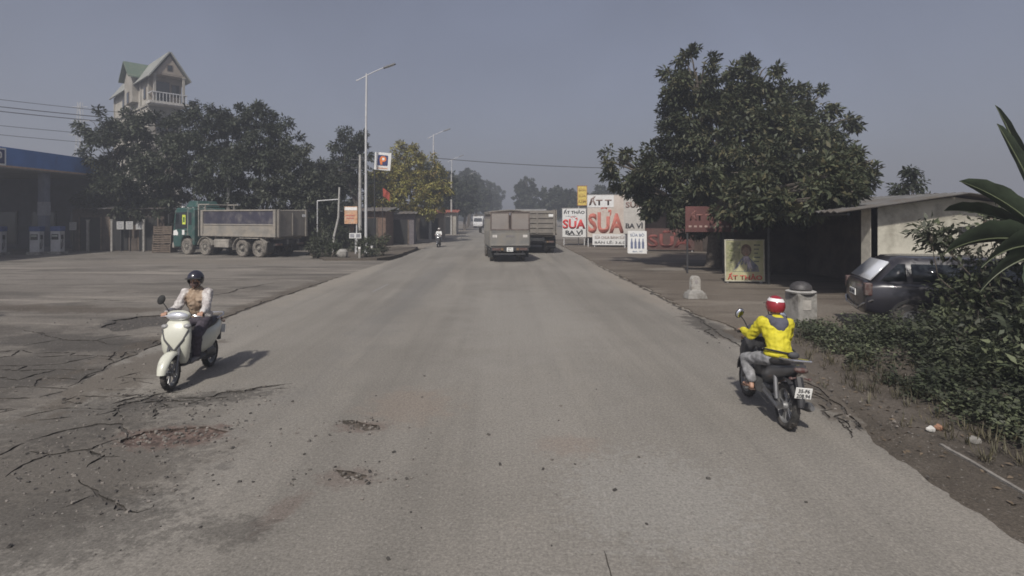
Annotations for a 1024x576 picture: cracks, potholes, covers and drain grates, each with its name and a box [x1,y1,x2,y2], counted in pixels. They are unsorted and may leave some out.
pothole [120,426,228,447]
pothole [336,470,372,481]
crack [804,382,861,438]
pothole [339,419,380,431]
crack [0,278,335,513]
